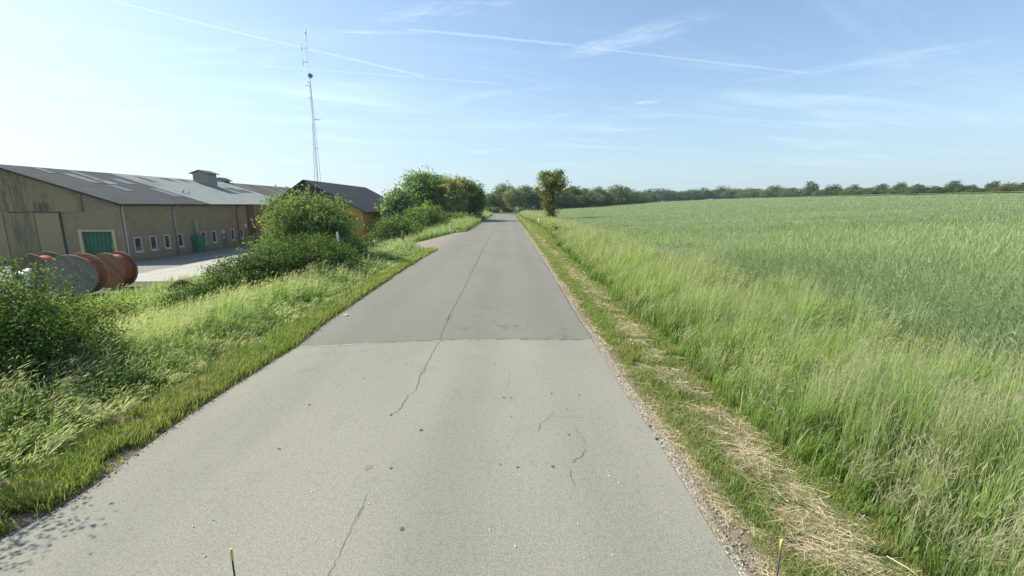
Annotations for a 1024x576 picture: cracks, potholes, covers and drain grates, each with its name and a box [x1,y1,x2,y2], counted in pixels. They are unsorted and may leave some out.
crack [376,226,591,414]
